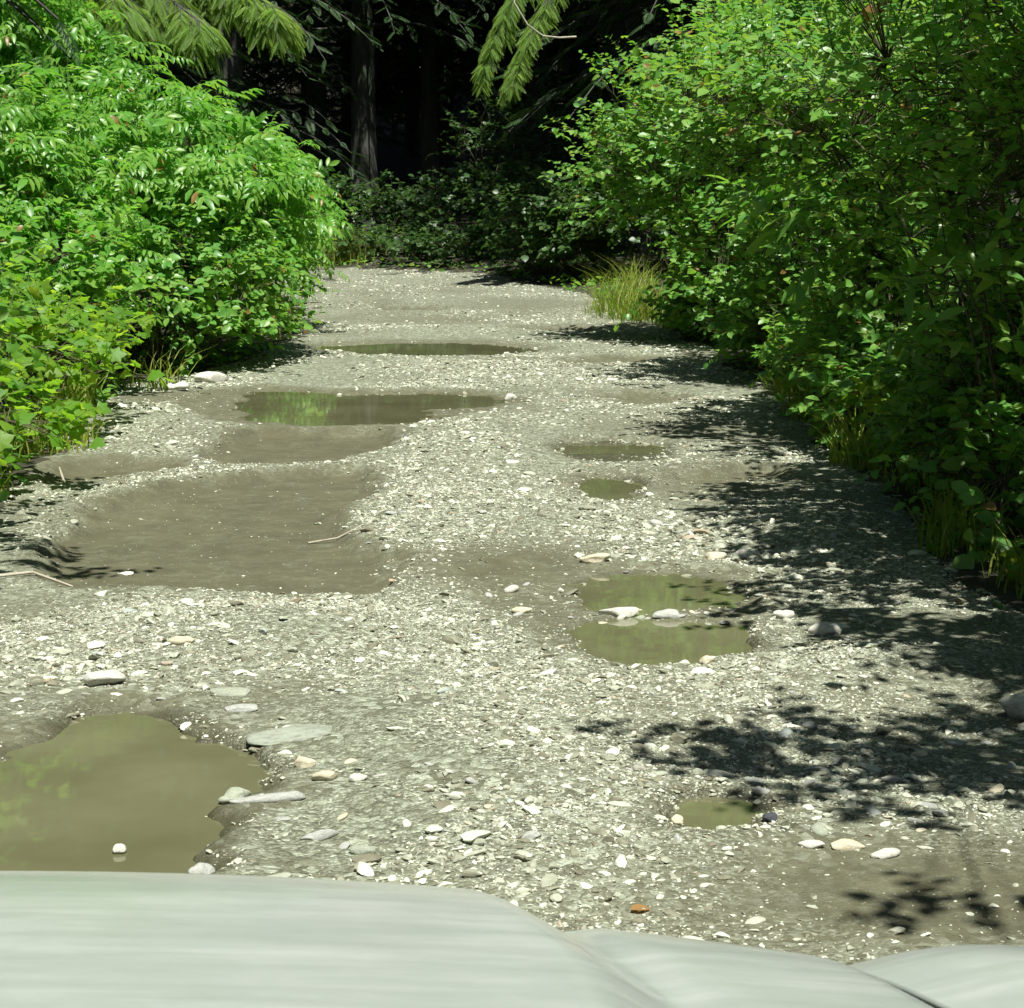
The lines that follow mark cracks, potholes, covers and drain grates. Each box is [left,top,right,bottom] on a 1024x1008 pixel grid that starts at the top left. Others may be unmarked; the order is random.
pothole [442,550,789,668]
pothole [294,337,560,356]
pothole [165,383,536,426]
pothole [190,423,425,465]
pothole [557,465,670,503]
pothole [0,687,305,875]
pothole [535,433,685,463]
pothole [7,462,431,596]
pothole [17,452,202,485]
